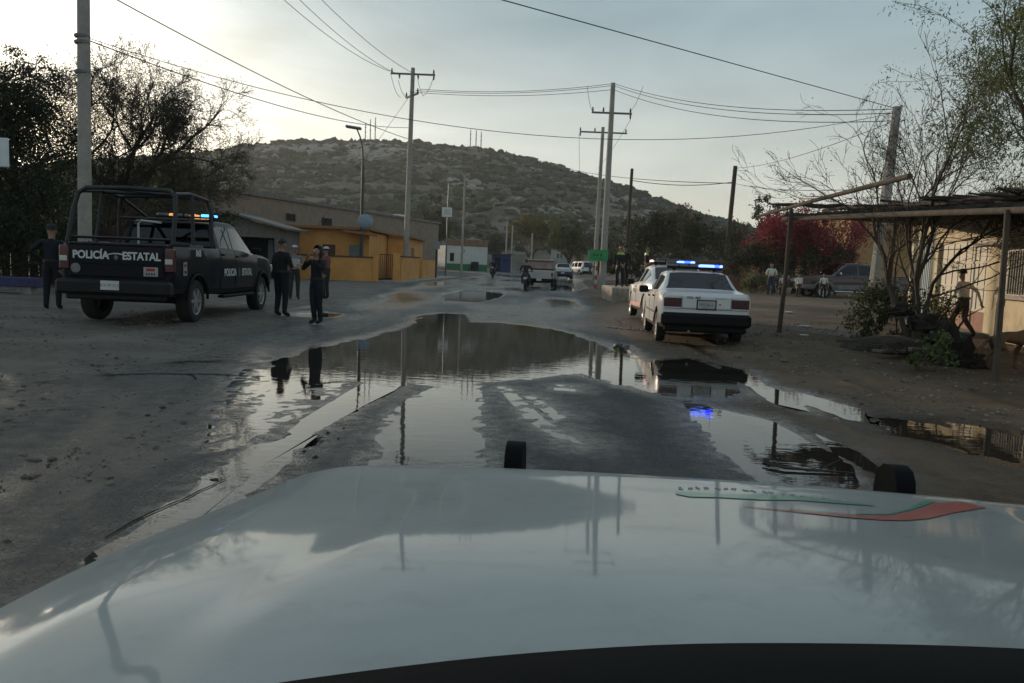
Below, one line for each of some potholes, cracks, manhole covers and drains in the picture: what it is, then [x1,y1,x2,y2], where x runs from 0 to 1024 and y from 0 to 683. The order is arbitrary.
pothole [439,290,508,303]
pothole [273,432,332,449]
pothole [611,343,640,354]
